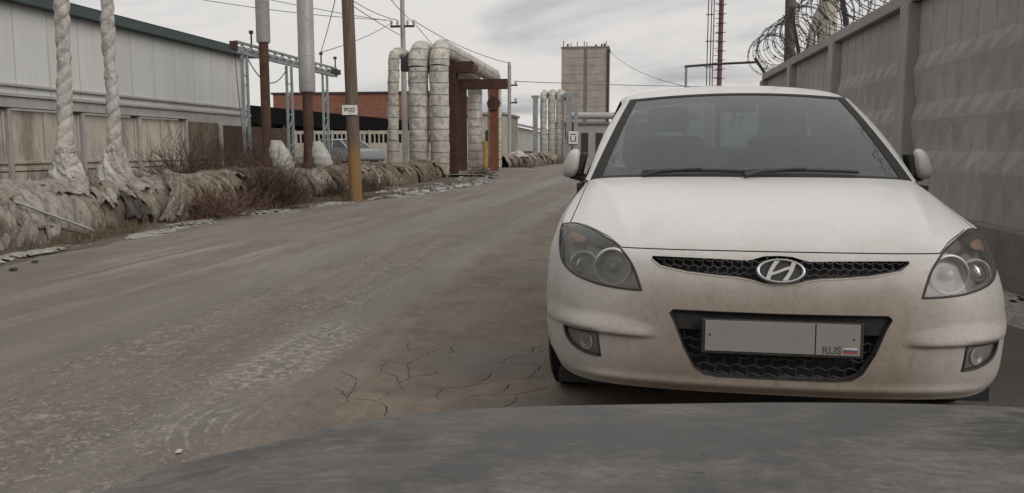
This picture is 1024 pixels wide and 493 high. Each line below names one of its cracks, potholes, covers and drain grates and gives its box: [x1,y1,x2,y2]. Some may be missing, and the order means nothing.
crack [334,338,550,417]
